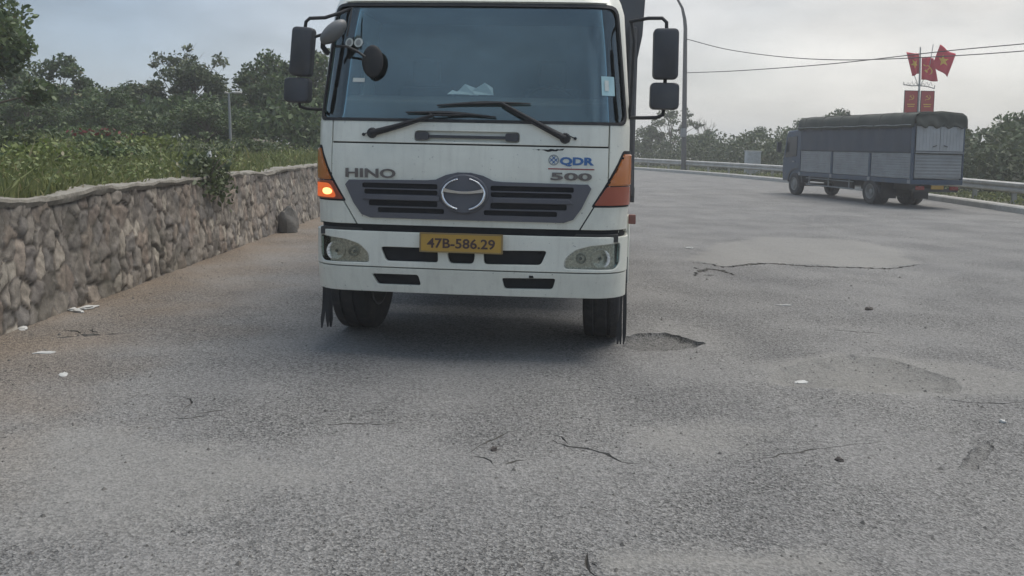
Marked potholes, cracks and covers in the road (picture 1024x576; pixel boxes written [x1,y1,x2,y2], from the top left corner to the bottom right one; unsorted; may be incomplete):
pothole [623,332,706,352]
pothole [772,355,962,394]
crack [172,396,227,419]
crack [469,432,524,464]
crack [59,329,124,338]
pothole [959,439,995,471]
crack [739,441,882,462]
crack [692,262,914,276]
crack [544,434,640,464]
